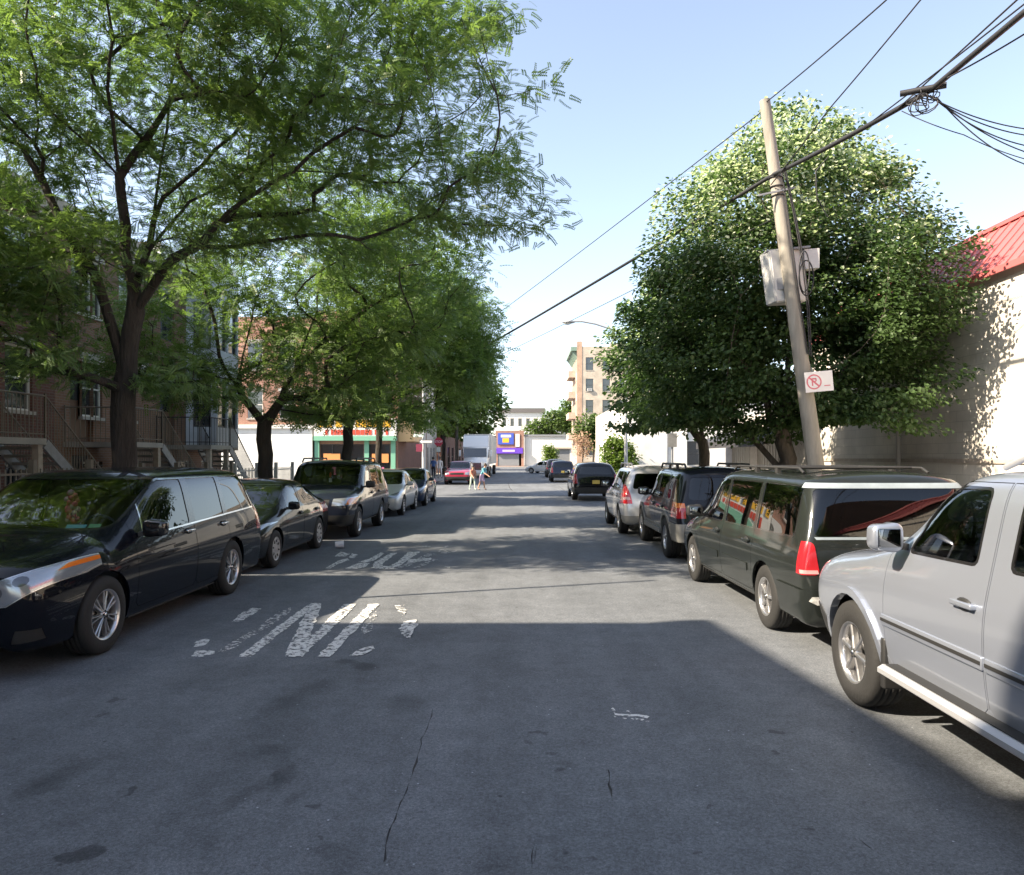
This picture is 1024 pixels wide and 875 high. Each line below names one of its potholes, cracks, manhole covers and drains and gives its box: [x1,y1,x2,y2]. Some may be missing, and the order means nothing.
crack [383,709,433,862]
